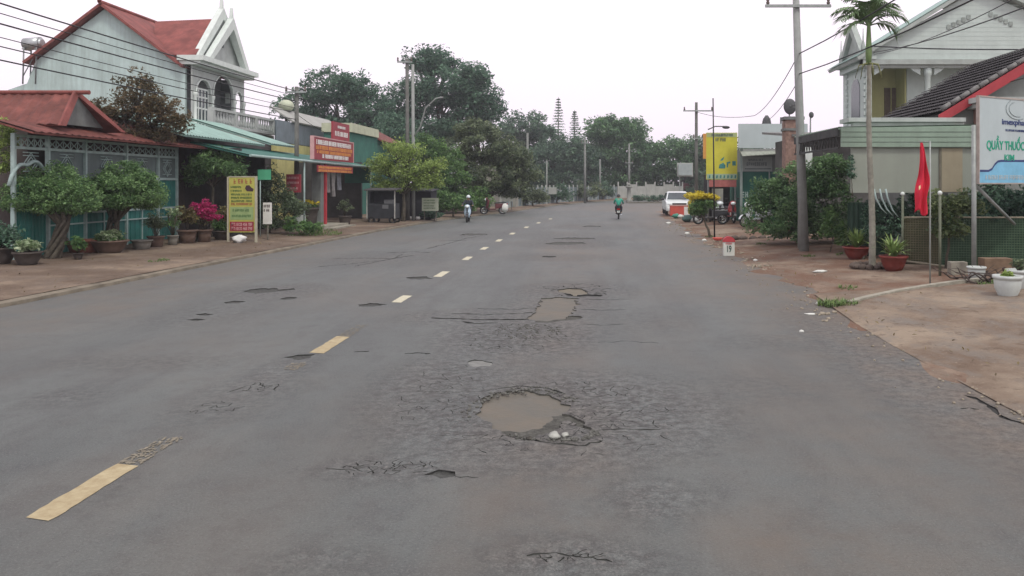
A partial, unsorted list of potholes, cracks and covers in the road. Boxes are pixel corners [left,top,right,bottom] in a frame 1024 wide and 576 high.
pothole [557,288,603,297]
pothole [468,360,493,368]
crack [527,549,612,562]
crack [428,382,677,456]
crack [960,395,1022,424]
crack [435,308,569,353]
pothole [475,390,594,438]
crack [397,366,481,420]
pothole [527,297,583,323]
